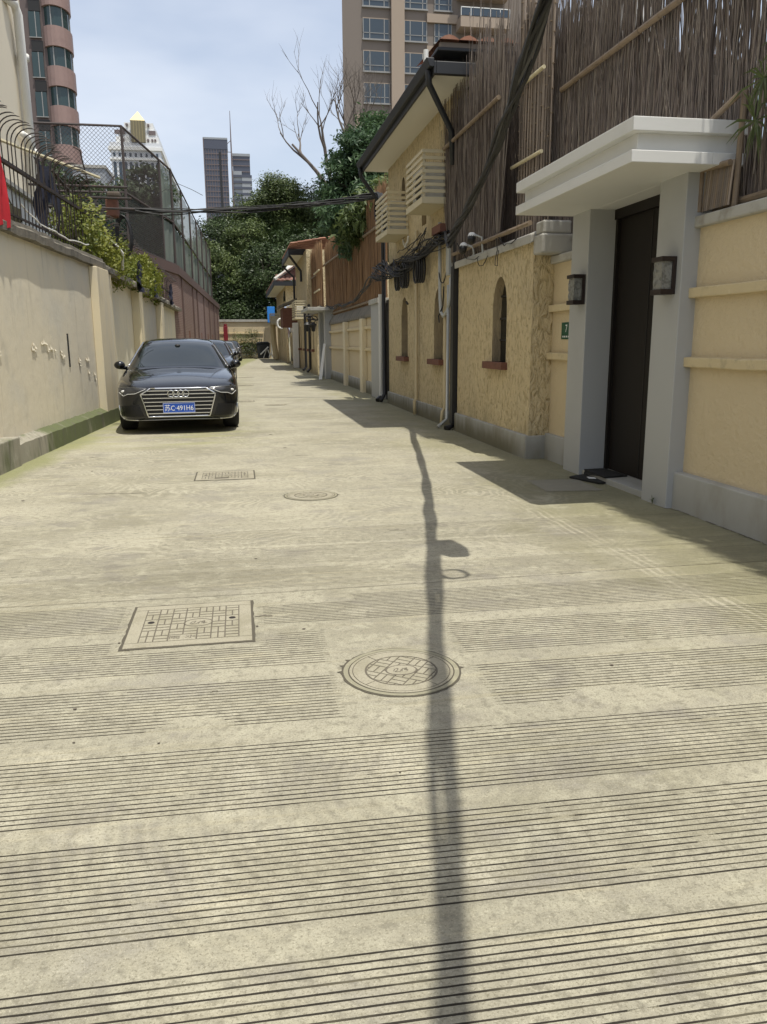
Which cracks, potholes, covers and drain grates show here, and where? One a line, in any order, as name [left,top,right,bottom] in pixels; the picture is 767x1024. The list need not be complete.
manhole cover [338,648,463,697]
manhole cover [118,600,256,651]
manhole cover [283,490,339,501]
manhole cover [194,470,256,481]
